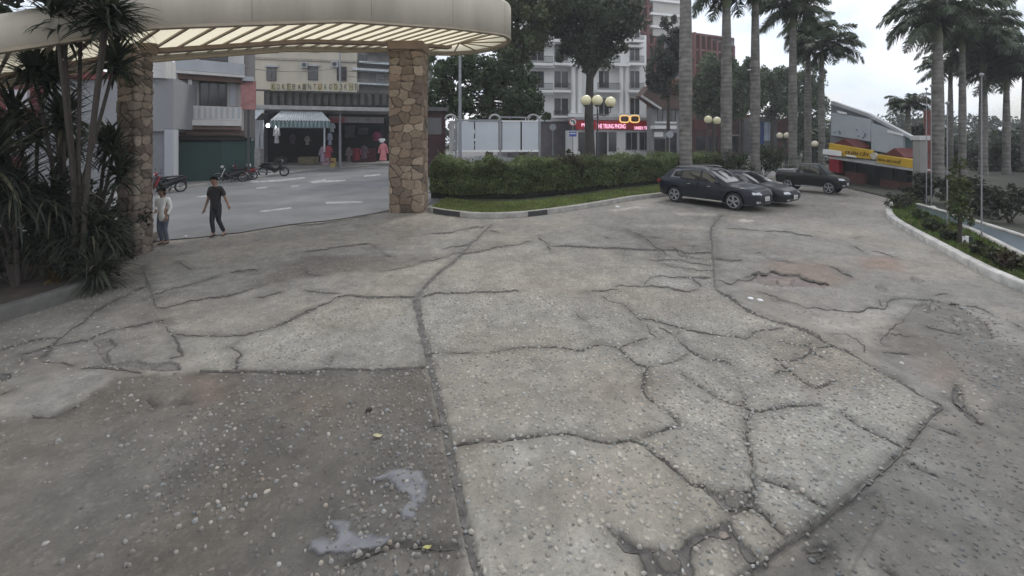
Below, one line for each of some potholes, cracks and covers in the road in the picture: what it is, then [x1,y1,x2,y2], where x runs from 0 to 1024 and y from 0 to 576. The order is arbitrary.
pothole [952,387,976,422]
crack [728,228,814,237]
pothole [754,271,826,287]
crack [2,262,339,374]
crack [345,544,456,564]
crack [306,226,567,270]
crack [429,232,991,560]
